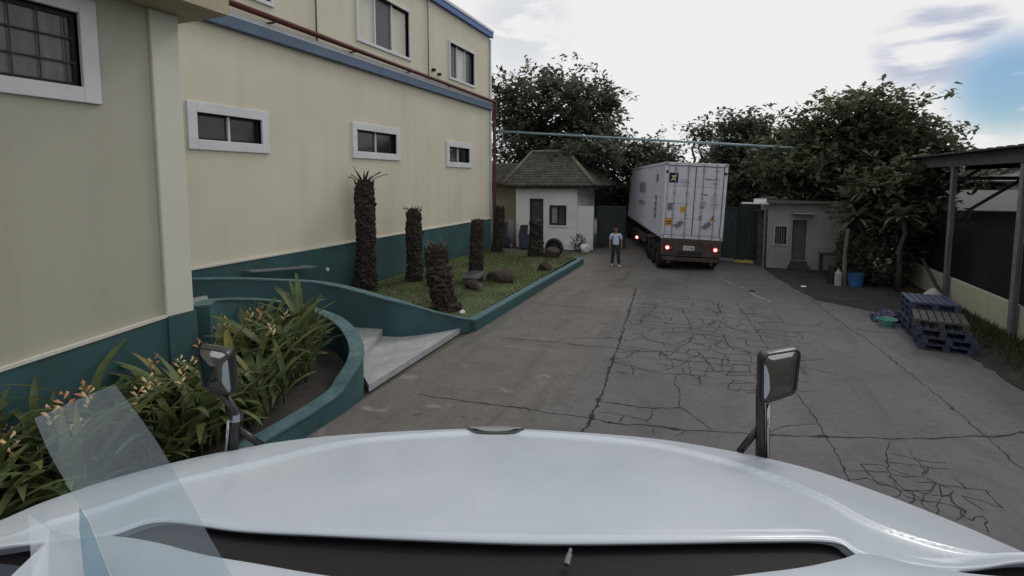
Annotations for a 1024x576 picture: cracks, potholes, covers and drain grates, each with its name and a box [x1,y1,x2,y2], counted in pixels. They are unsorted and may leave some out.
crack [418,297,1024,532]
